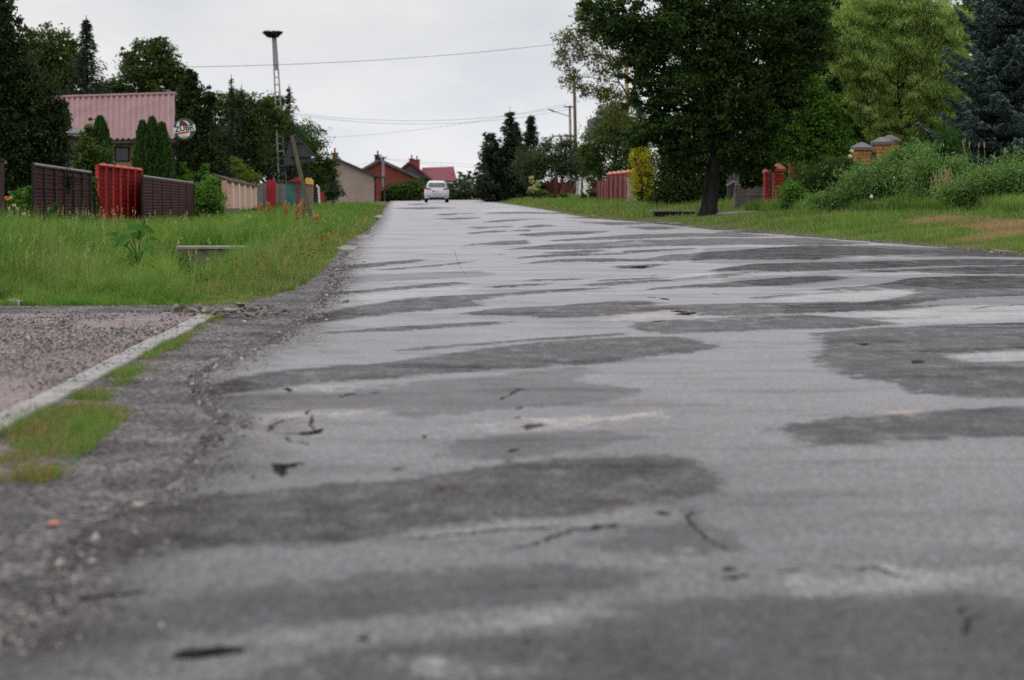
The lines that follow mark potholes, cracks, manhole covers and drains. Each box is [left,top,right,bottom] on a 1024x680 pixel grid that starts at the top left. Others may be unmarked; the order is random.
crack [266,410,330,446]
crack [685,511,747,551]
pothole [271,462,305,478]
crack [406,524,631,550]
